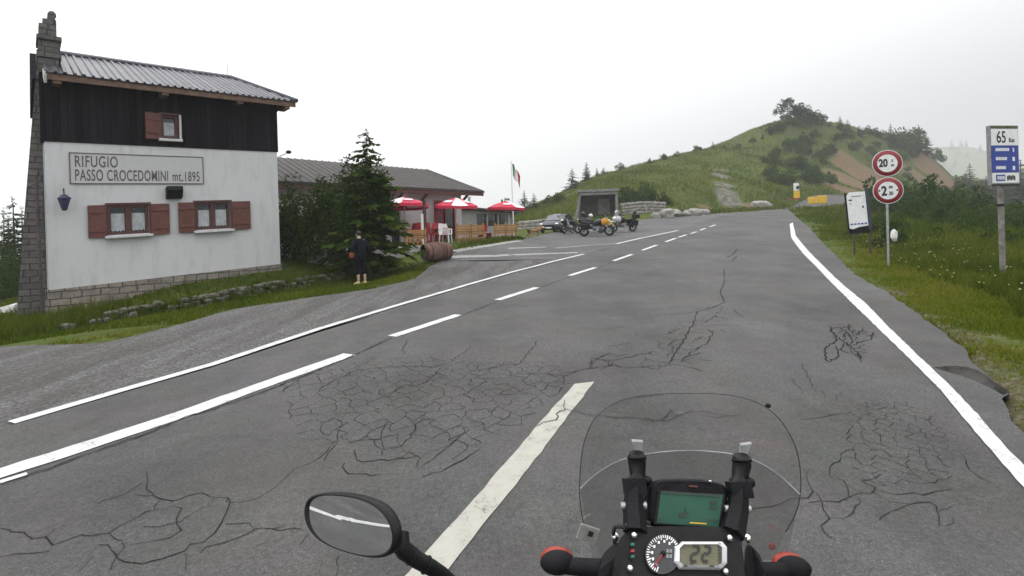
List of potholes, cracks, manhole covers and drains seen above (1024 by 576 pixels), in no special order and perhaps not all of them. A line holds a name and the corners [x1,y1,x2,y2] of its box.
crack [273,340,735,477]
crack [560,253,740,374]
crack [1,412,347,575]
crack [752,324,987,537]
